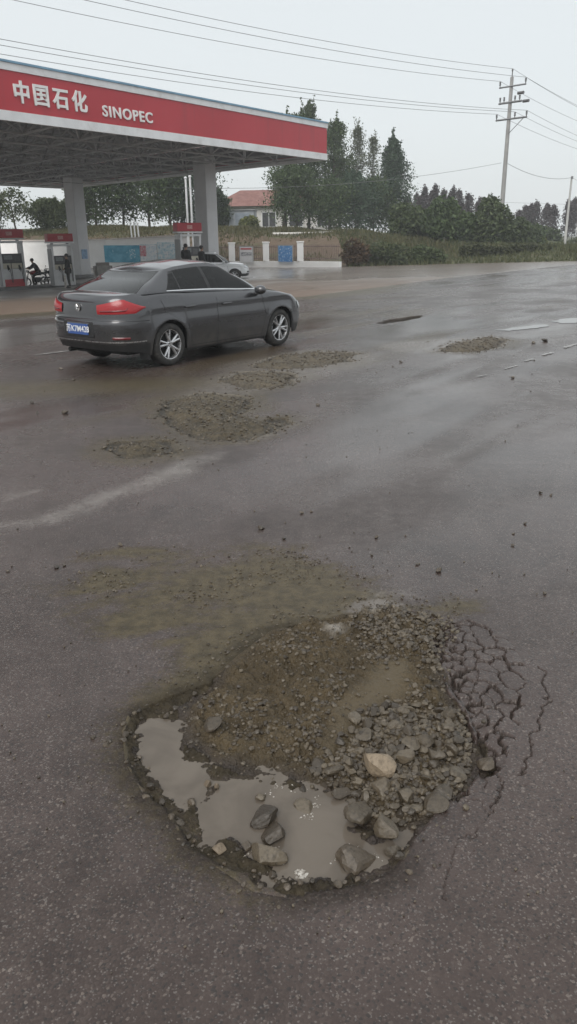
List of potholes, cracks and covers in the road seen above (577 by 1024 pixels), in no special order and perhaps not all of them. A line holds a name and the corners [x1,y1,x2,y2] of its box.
pothole [368,314,429,325]
pothole [208,369,314,393]
pothole [98,603,496,913]
pothole [86,435,194,463]
crack [422,619,560,913]
pothole [243,350,364,371]
pothole [136,391,305,445]
pothole [427,335,514,353]
